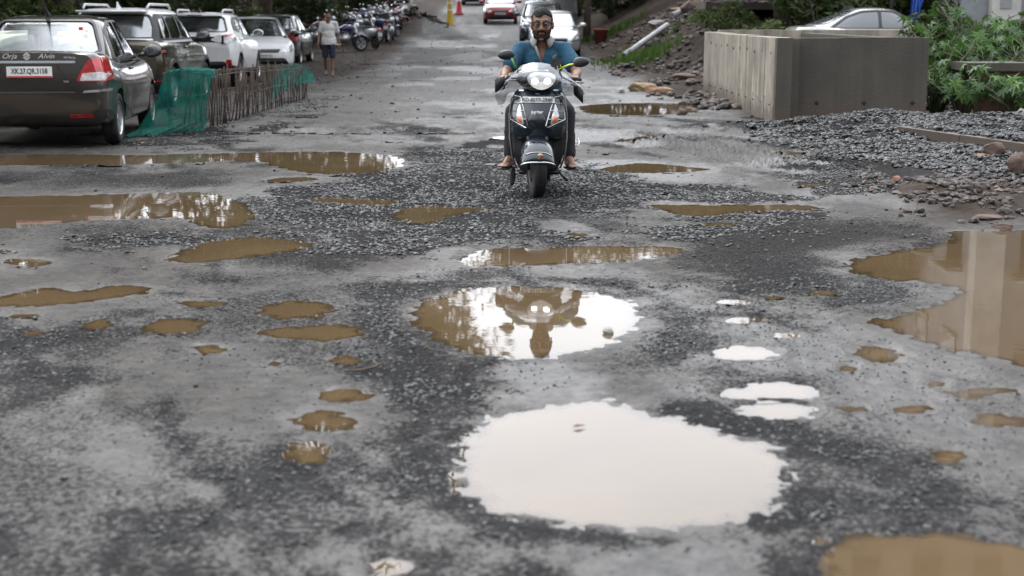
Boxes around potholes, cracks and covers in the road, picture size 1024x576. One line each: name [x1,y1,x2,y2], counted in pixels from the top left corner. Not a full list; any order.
pothole [0,149,419,177]
pothole [388,280,669,363]
pothole [152,234,323,266]
pothole [820,225,1024,372]
pothole [438,241,703,270]
pothole [590,161,720,174]
pothole [702,377,838,405]
pothole [269,434,345,466]
pothole [0,282,166,309]
pothole [572,101,713,117]
pothole [241,320,377,343]
pothole [241,297,349,321]
